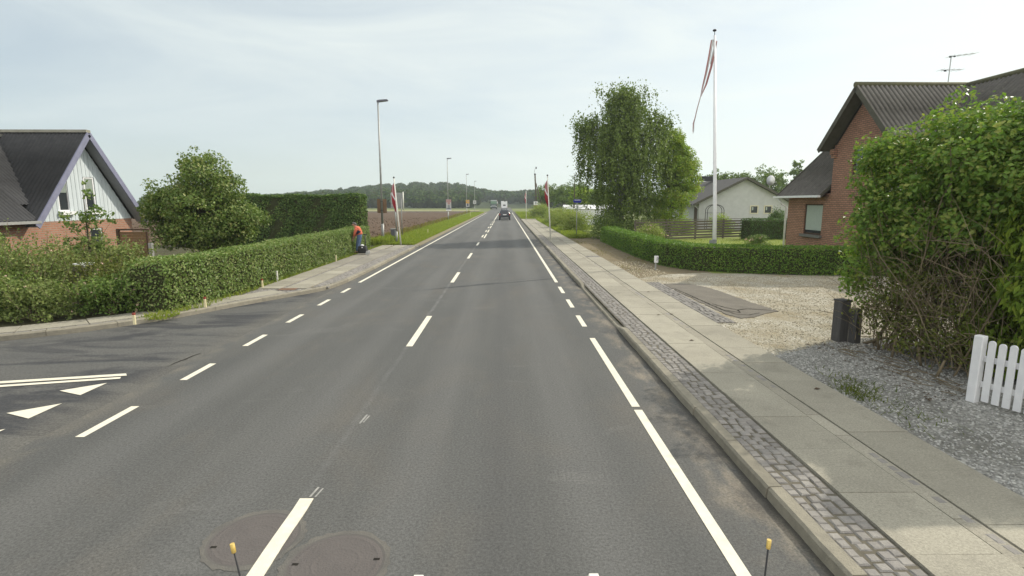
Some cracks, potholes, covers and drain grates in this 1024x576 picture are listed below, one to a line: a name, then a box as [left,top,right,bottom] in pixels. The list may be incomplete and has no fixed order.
manhole cover [277,530,391,576]
manhole cover [199,509,308,572]
